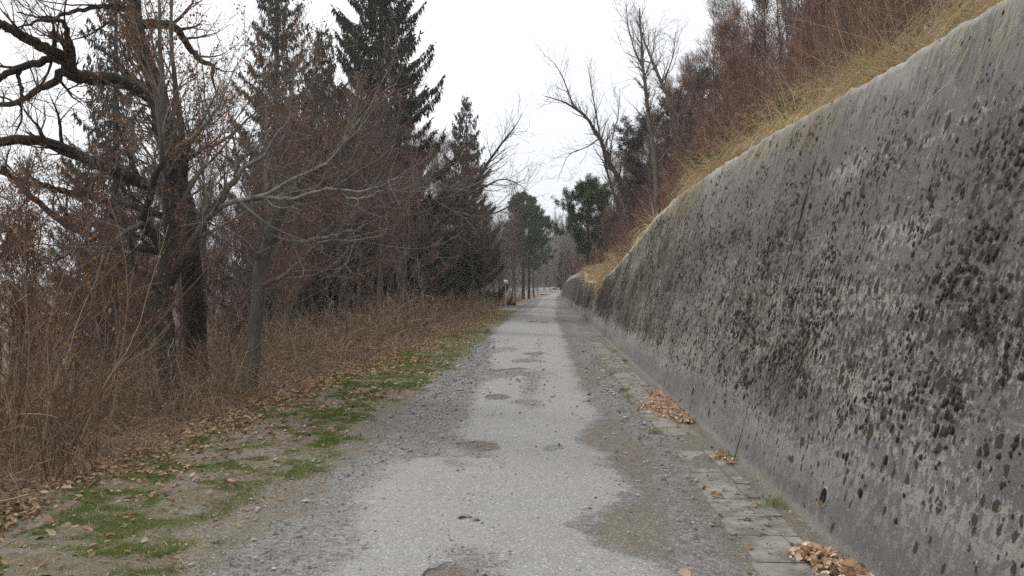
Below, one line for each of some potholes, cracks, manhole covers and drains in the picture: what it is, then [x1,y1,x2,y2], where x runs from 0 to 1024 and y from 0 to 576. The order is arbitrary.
pothole [540,443,566,452]
pothole [461,441,504,452]
pothole [482,368,529,379]
pothole [422,561,485,576]
